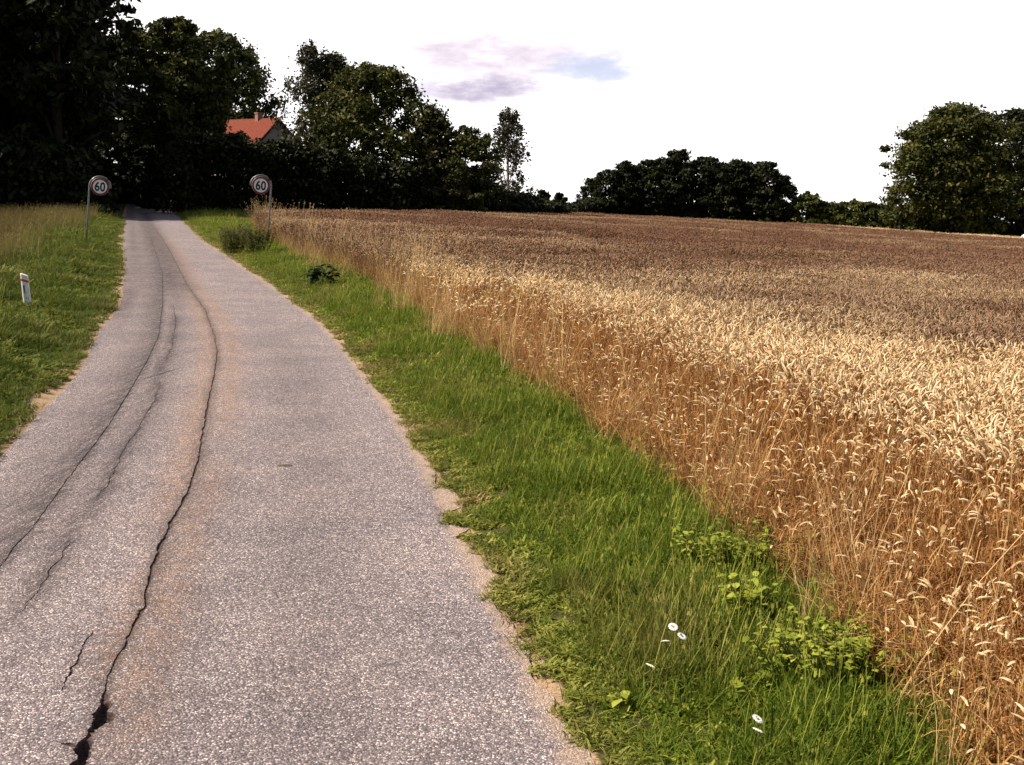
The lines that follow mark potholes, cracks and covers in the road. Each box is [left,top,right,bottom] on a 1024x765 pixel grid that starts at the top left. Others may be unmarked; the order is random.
crack [58,631,93,696]
